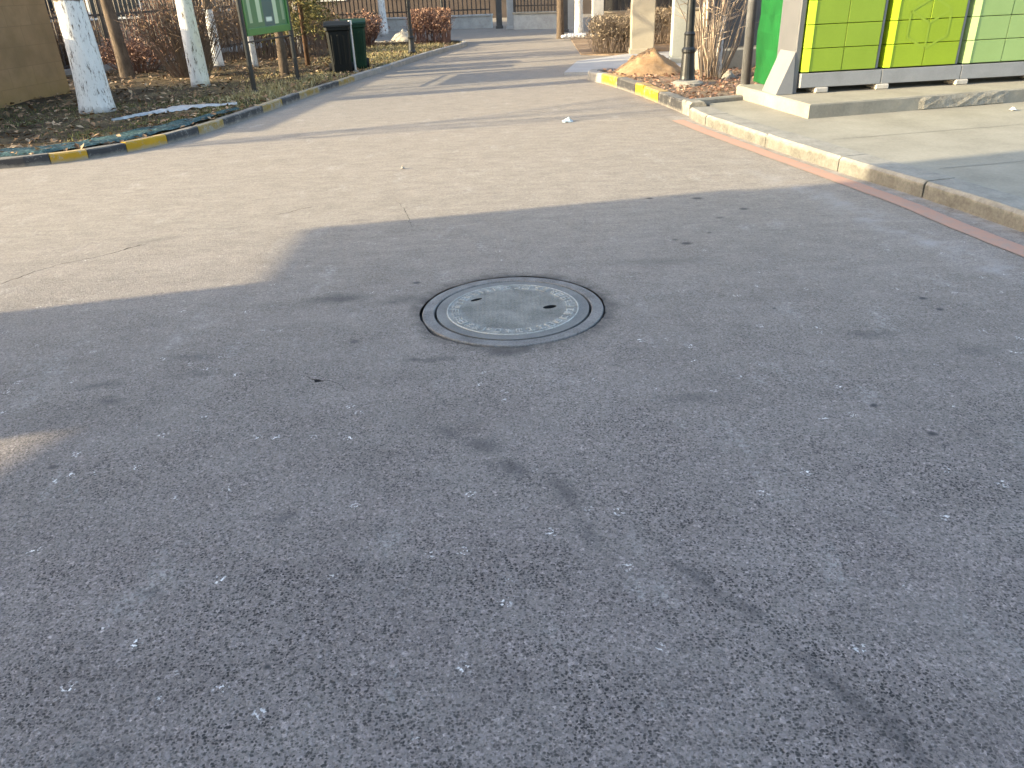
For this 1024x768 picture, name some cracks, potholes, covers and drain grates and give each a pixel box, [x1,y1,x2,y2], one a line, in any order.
manhole cover [420,277,606,348]
crack [292,374,348,391]
